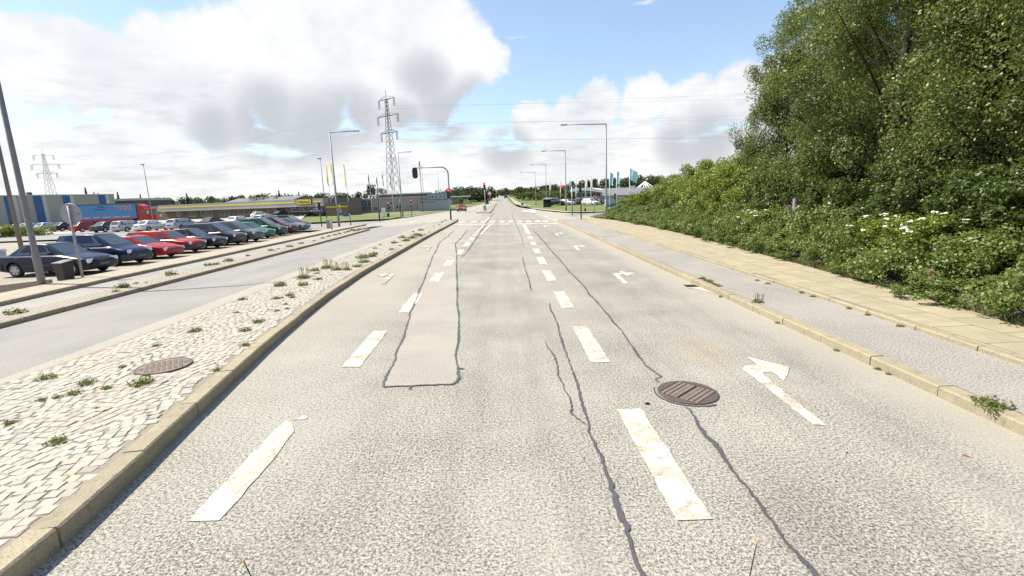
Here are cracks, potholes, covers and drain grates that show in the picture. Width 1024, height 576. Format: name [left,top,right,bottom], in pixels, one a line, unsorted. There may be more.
manhole cover [133,357,193,376]
manhole cover [654,381,719,407]
